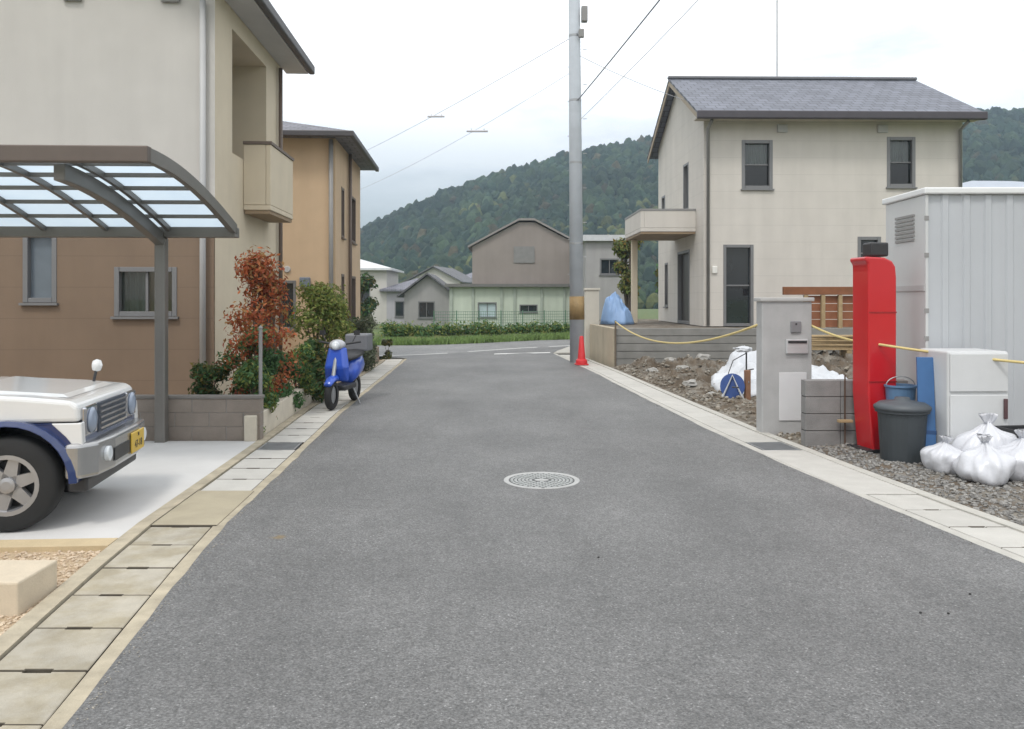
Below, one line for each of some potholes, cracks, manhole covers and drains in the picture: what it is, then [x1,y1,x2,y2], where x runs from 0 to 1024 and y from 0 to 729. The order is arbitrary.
manhole cover [504,472,580,489]
drain grate [746,442,800,450]
drain grate [257,442,302,450]
